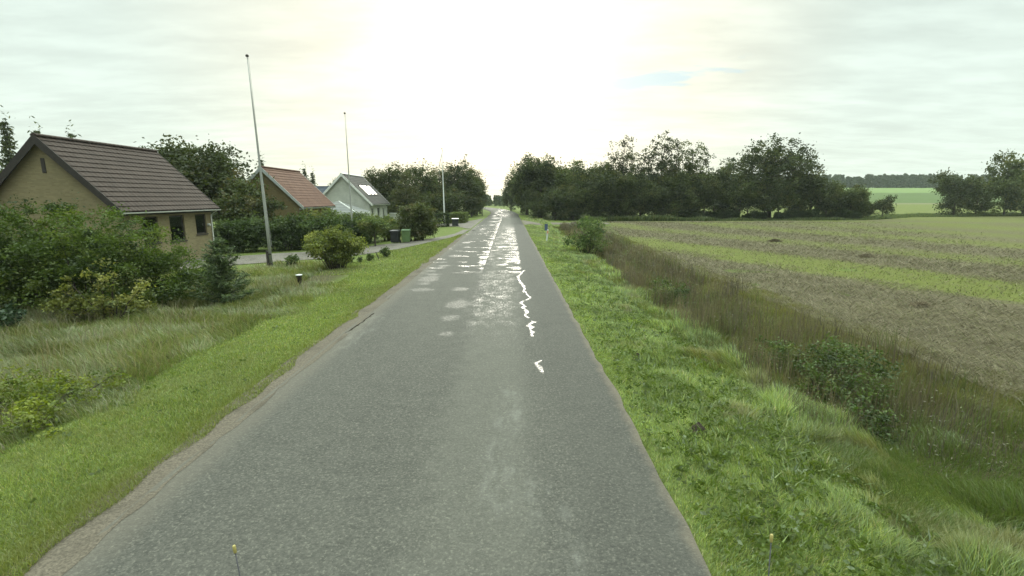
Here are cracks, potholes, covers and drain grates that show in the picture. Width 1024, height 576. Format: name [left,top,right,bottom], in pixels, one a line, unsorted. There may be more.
crack [499,270,537,337]
crack [532,359,544,374]
